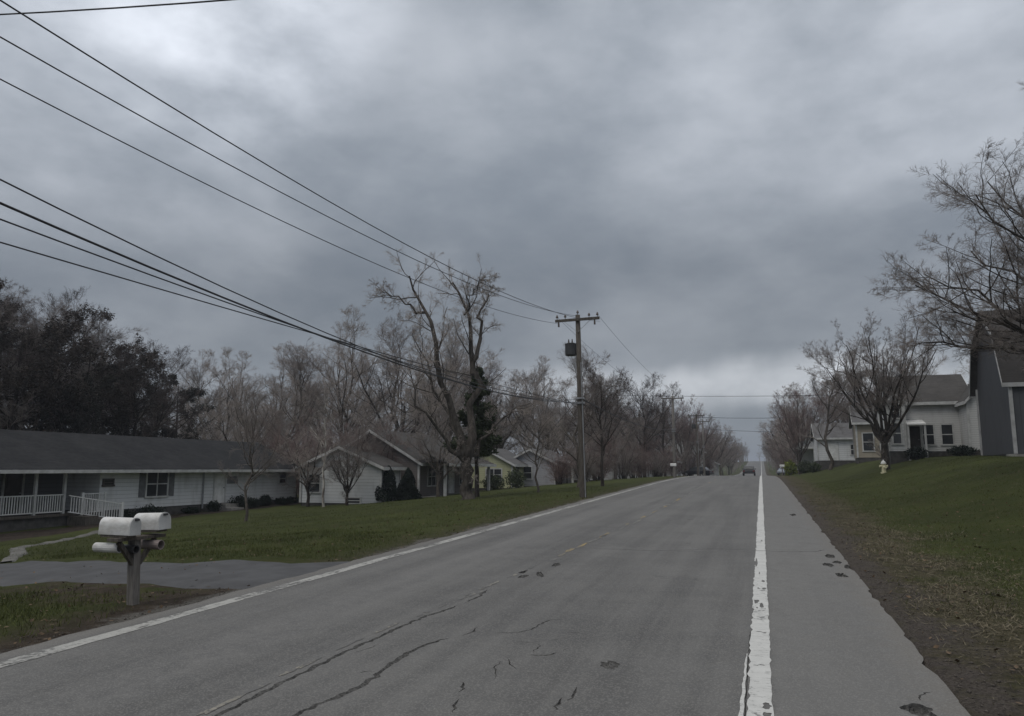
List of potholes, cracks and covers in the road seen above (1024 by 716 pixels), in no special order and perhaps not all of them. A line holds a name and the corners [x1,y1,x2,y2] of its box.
crack [214,590,487,716]
pothole [600,660,620,670]
pothole [899,703,937,716]
crack [493,619,568,678]
crack [553,687,577,711]
